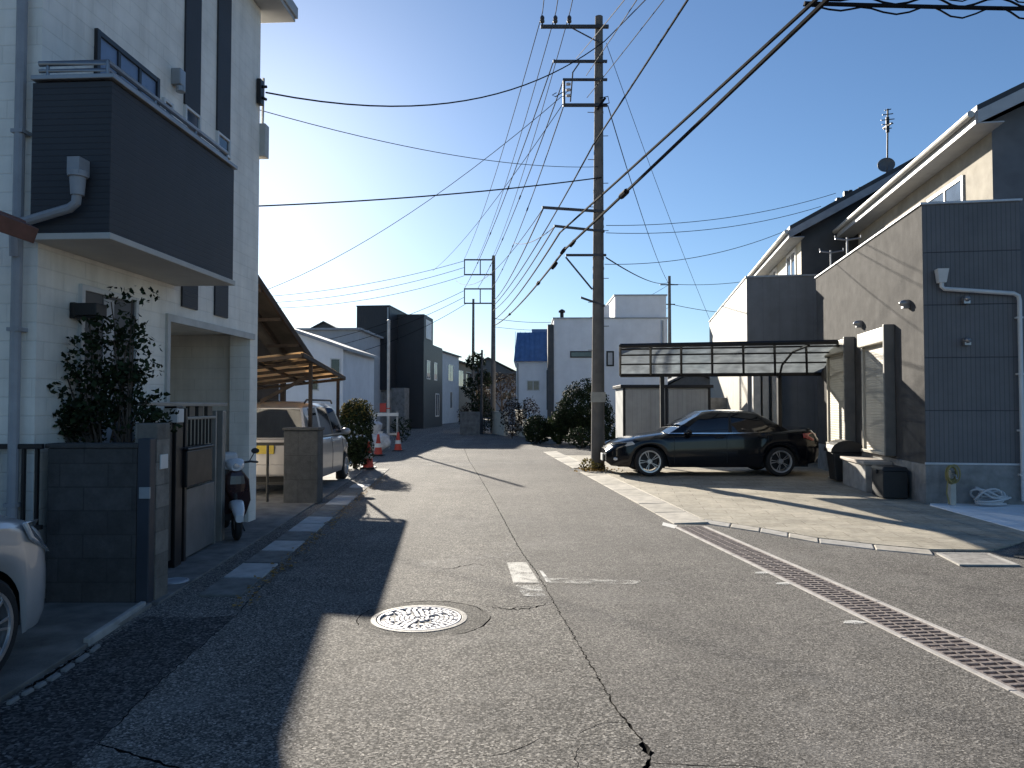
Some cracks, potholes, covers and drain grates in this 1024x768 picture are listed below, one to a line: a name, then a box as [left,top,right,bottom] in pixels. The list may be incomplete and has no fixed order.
drain grate [706,539,770,557]
drain grate [930,646,1024,693]
drain grate [847,606,978,648]
crack [95,743,180,768]
manhole cover [936,552,1020,567]
manhole cover [370,605,468,633]
crack [356,449,768,768]
drain grate [741,556,820,579]
drain grate [787,578,884,608]
drain grate [679,526,733,540]
